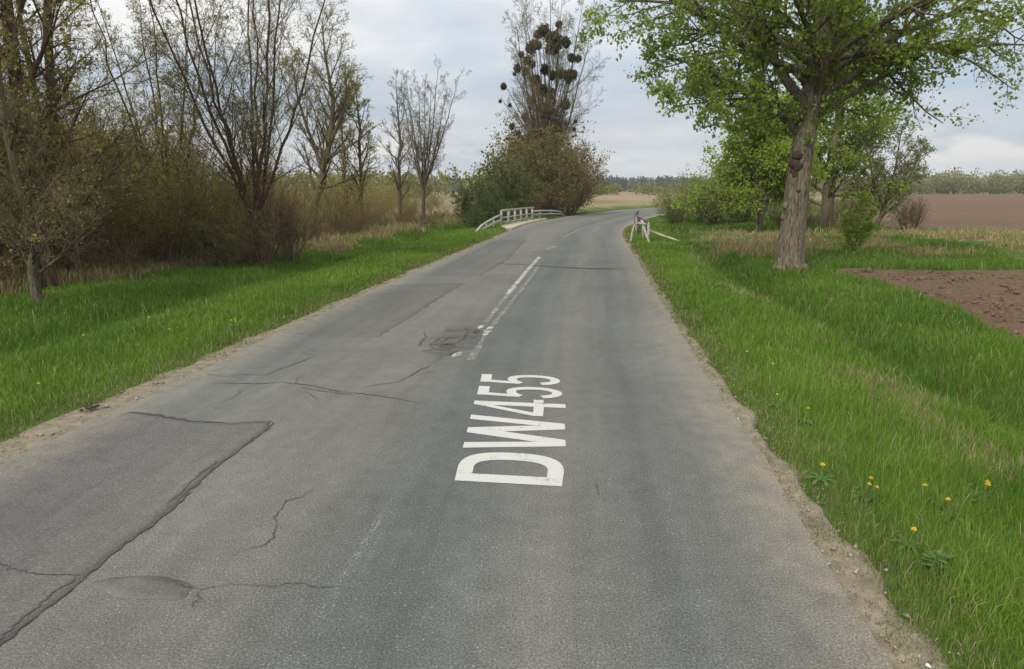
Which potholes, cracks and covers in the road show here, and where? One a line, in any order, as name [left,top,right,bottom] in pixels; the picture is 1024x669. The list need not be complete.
crack [210,325,486,403]
crack [149,577,360,607]
crack [240,488,313,551]
